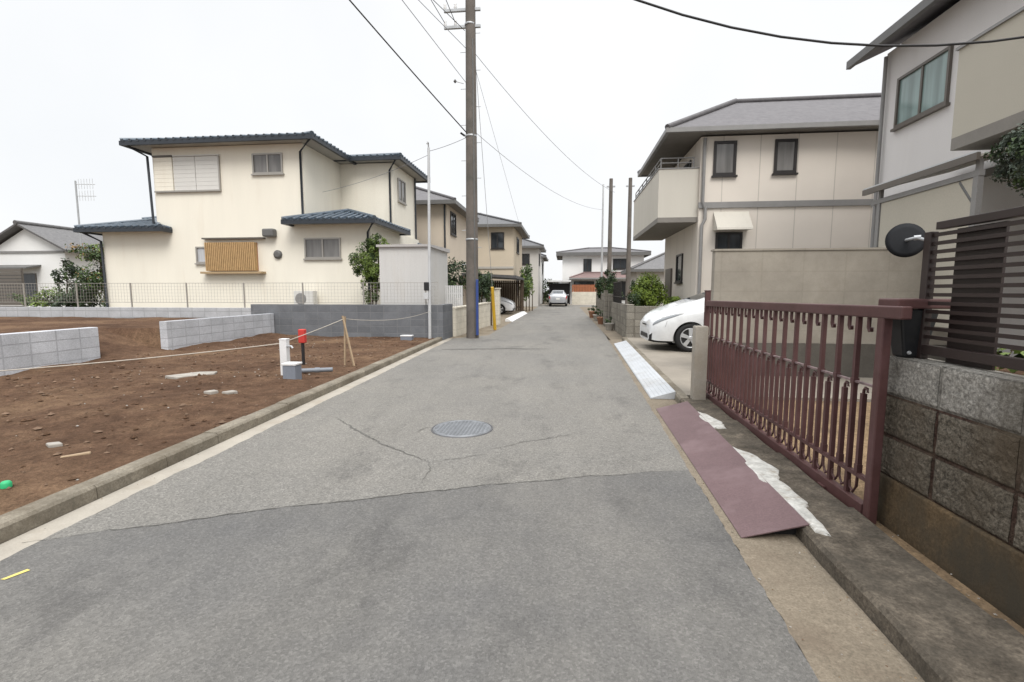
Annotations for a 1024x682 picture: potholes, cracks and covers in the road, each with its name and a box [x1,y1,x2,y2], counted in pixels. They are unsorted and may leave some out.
crack [22,418,667,543]
manhole cover [431,420,493,438]
